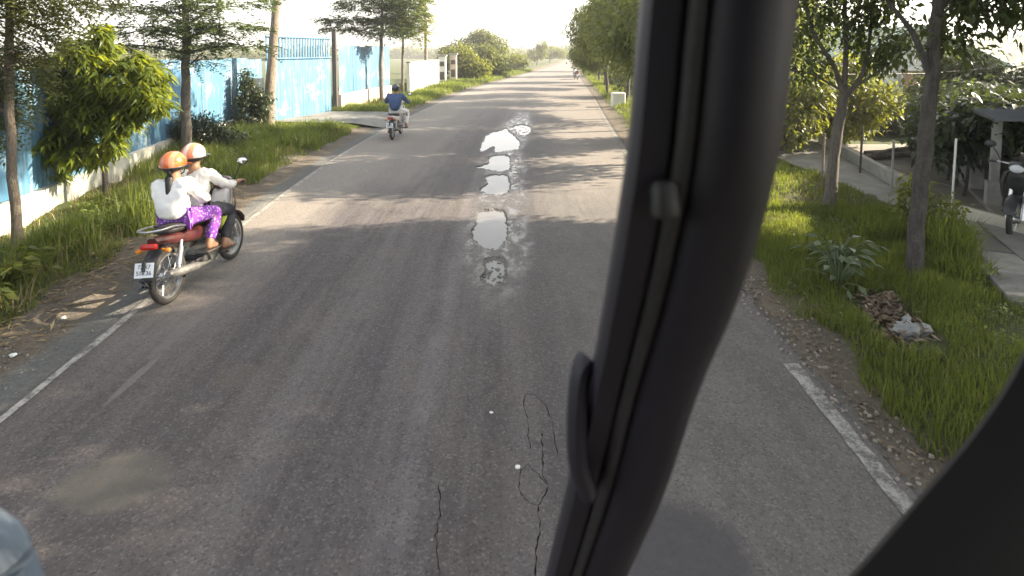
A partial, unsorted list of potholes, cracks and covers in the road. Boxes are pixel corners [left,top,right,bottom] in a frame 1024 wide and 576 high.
pothole [479,128,522,152]
pothole [470,208,509,251]
pothole [512,124,532,136]
pothole [475,154,512,172]
pothole [479,173,512,196]
crack [518,394,558,575]
pothole [479,256,508,289]
